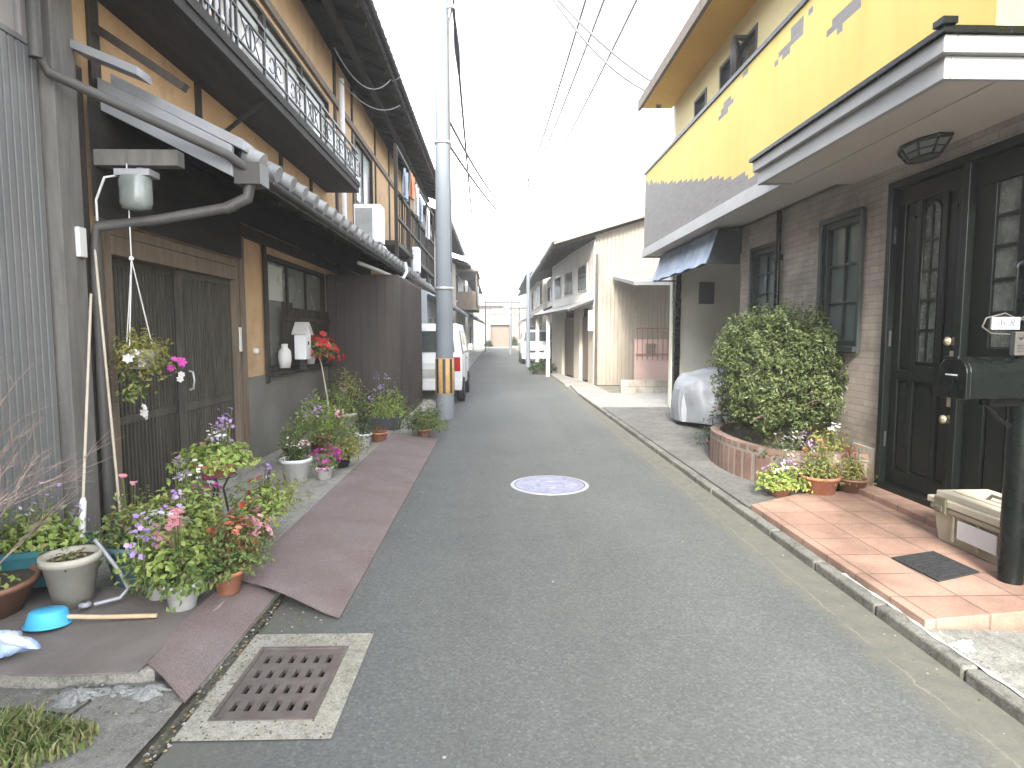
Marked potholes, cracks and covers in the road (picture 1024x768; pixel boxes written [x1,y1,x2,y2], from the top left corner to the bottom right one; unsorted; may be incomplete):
drain grate [207,646,349,721]
manhole cover [511,475,589,495]
